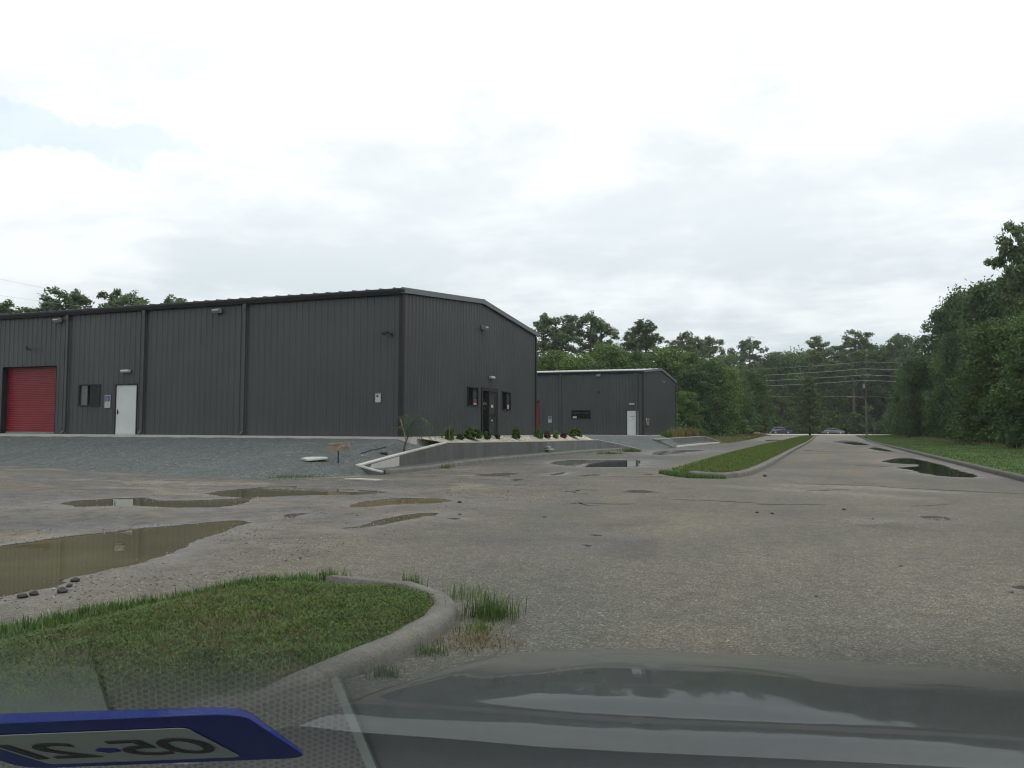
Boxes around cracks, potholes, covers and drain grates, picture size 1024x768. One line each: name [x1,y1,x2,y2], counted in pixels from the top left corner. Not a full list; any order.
pothole [0,520,253,597]
pothole [341,513,438,529]
pothole [62,486,385,508]
pothole [349,498,450,507]
